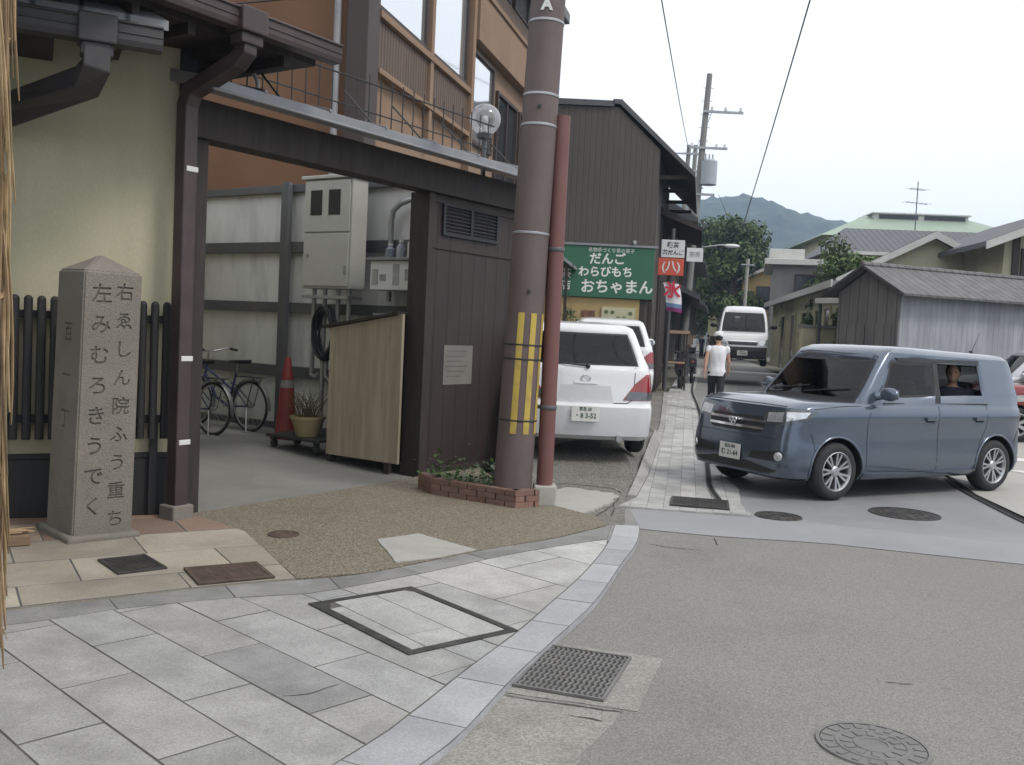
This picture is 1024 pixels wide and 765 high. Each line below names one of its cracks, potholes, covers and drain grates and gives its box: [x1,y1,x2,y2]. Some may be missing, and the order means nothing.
manhole cover [815,721,933,765]
crack [507,695,621,721]
drain grate [512,644,632,702]
manhole cover [754,511,803,521]
manhole cover [868,507,942,521]
utility cover [308,586,518,655]
drain grate [670,496,730,510]
manhole cover [267,530,300,538]
